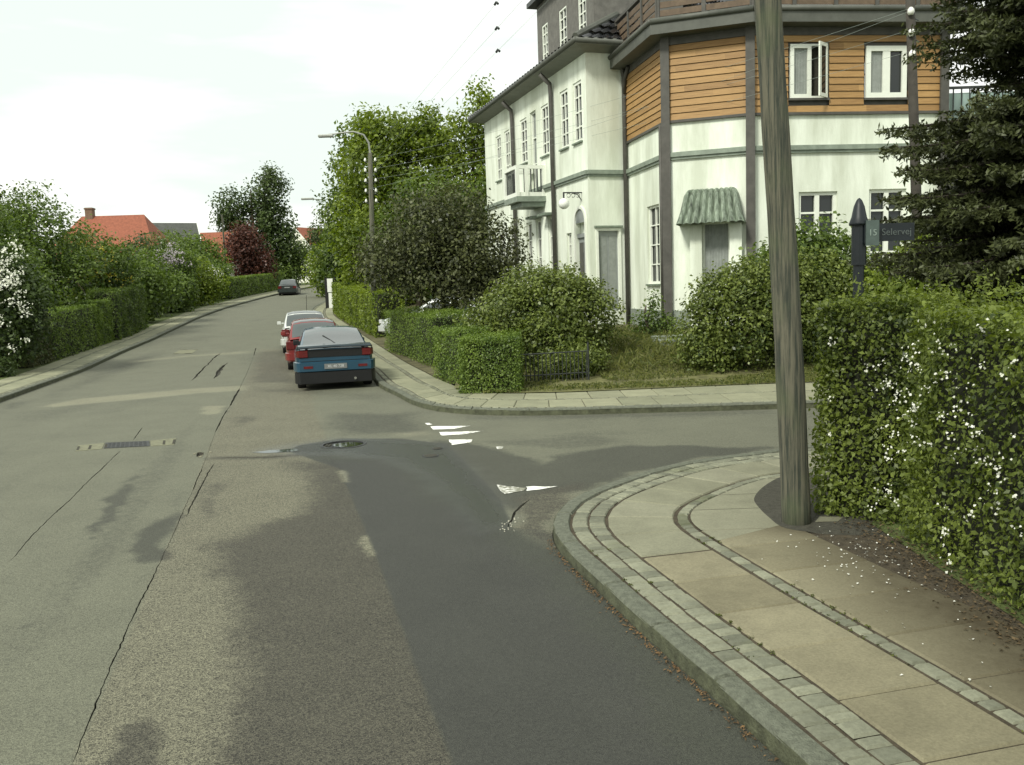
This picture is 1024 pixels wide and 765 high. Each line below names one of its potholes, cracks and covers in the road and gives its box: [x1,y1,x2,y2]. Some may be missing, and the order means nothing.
manhole cover [320,440,366,449]
crack [71,348,256,765]
crack [12,428,142,559]
